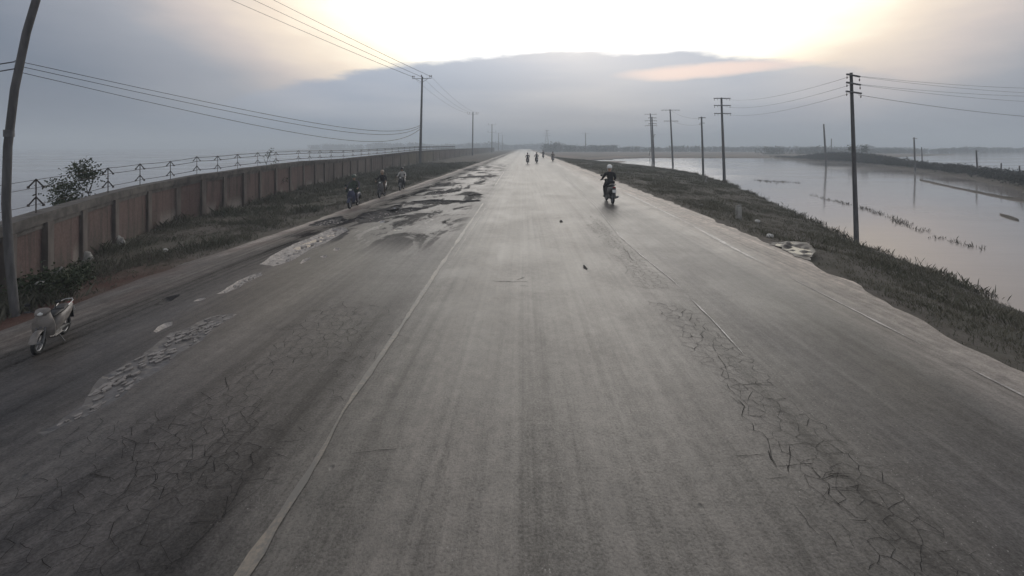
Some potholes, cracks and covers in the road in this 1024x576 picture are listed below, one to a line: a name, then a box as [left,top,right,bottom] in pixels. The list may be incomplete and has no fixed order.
crack [0,301,397,576]
pothole [154,294,180,305]
pothole [309,216,347,226]
pothole [354,207,428,225]
